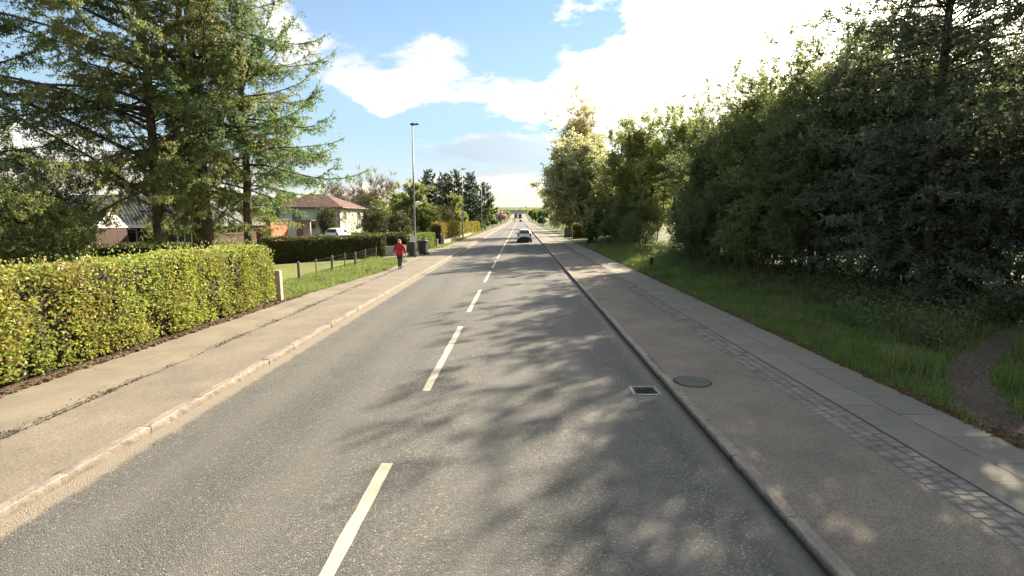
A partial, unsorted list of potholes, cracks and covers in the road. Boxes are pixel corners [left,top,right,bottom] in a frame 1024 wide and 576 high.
drain grate [628,386,663,396]
manhole cover [673,376,712,388]
